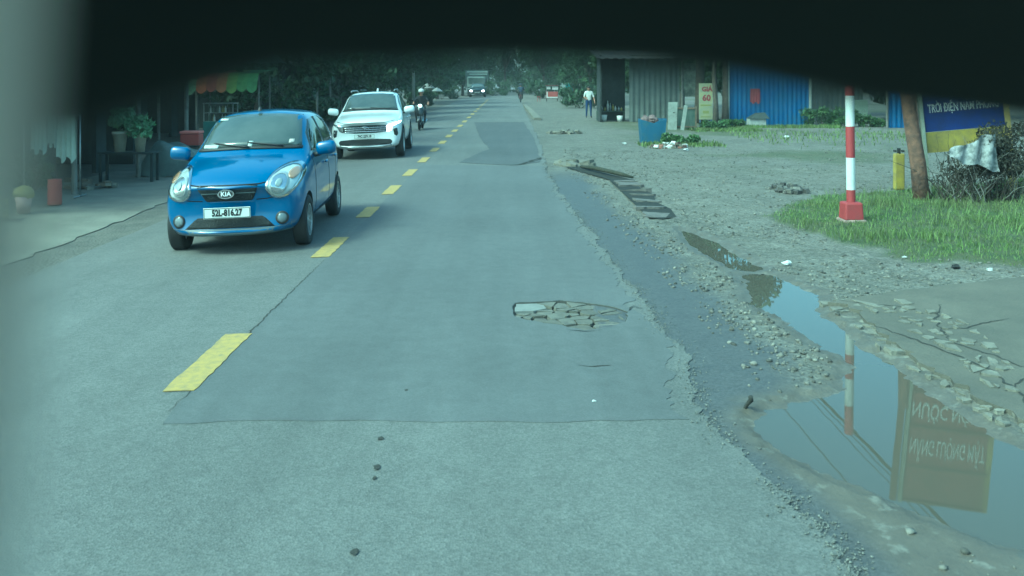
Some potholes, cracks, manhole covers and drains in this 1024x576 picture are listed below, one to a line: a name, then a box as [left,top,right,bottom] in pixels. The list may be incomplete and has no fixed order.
crack [876,304,1024,402]
pothole [513,301,628,330]
